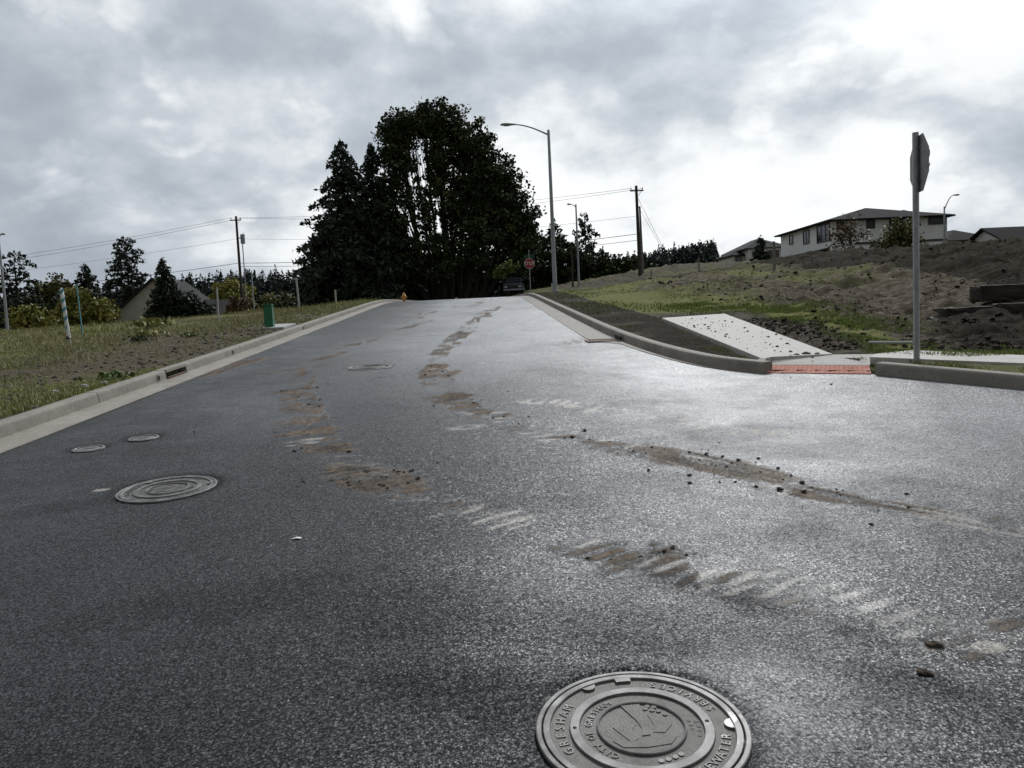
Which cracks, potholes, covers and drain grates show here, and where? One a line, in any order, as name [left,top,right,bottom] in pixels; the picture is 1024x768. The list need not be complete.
manhole cover [536,671,752,768]
manhole cover [71,445,106,453]
manhole cover [115,475,217,504]
drain grate [155,364,188,379]
manhole cover [128,434,159,442]
